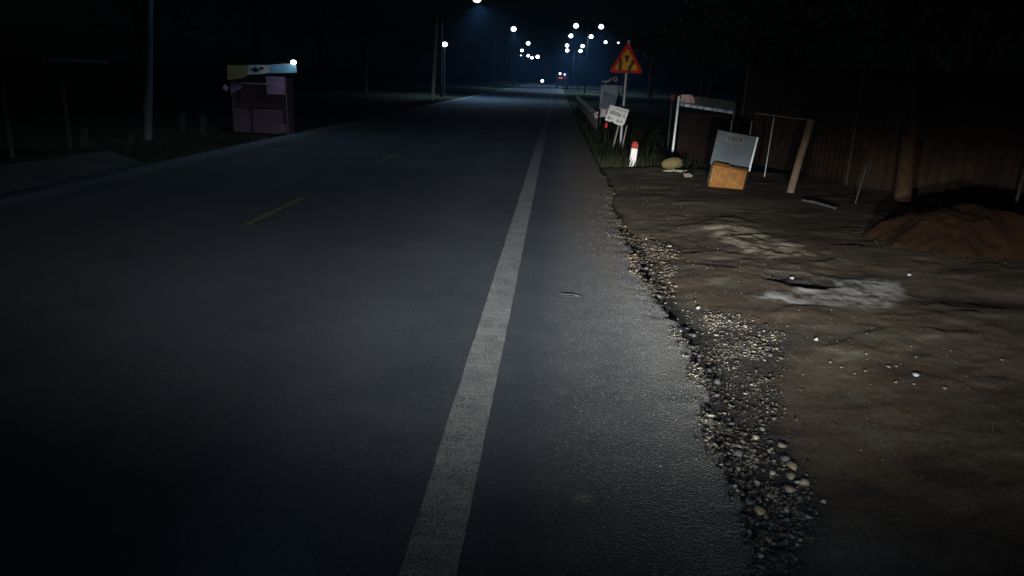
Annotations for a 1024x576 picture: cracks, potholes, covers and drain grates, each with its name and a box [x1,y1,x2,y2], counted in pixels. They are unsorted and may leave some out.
pothole [764,271,838,290]
